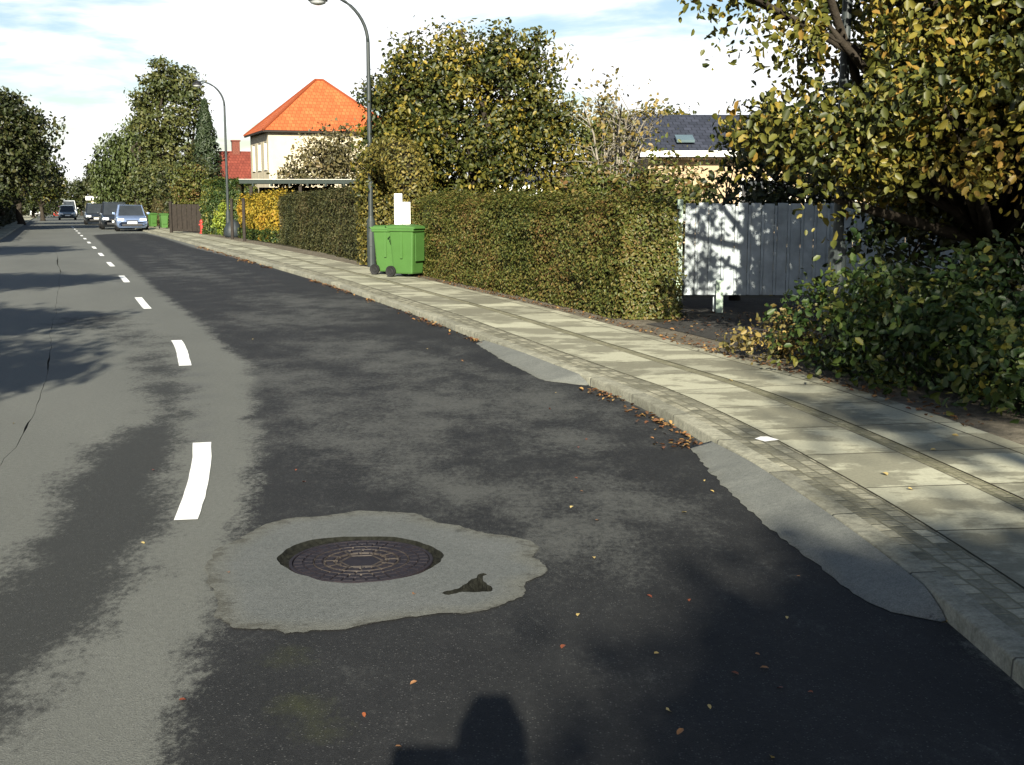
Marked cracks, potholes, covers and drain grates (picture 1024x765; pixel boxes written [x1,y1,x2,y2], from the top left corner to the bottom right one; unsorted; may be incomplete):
manhole cover [277,536,444,583]
crack [1,257,61,464]
pothole [442,573,493,595]
